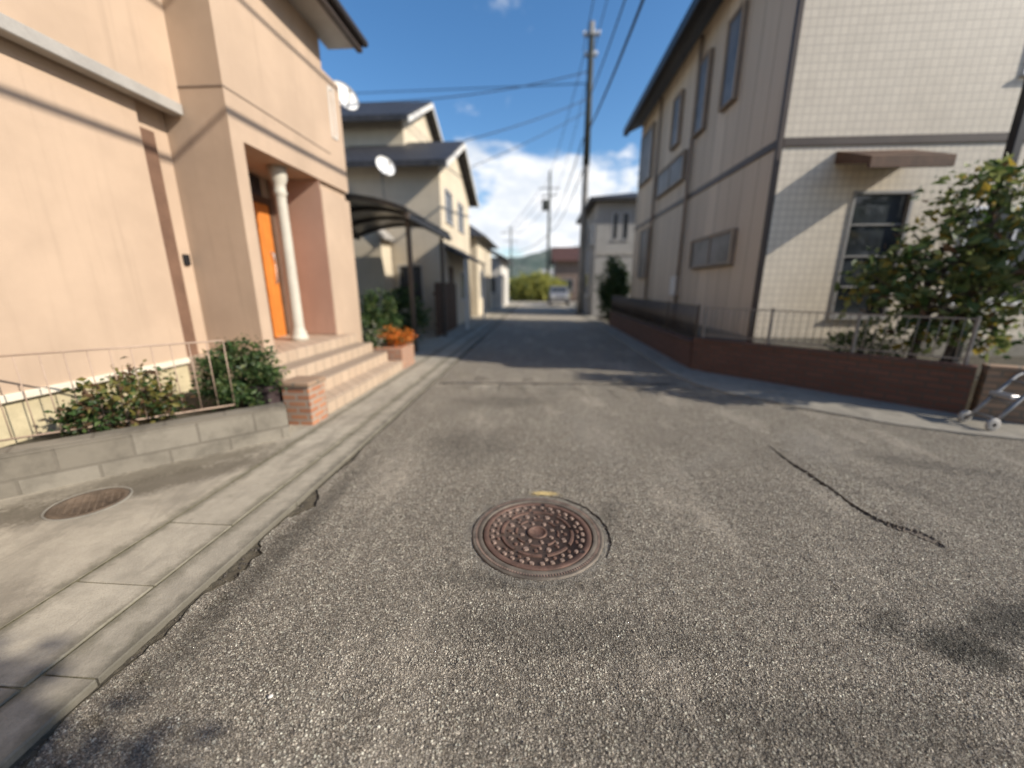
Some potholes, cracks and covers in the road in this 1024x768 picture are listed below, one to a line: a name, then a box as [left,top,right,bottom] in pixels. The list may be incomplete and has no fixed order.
manhole cover [472,498,604,581]
crack [770,446,945,548]
manhole cover [40,486,133,522]
